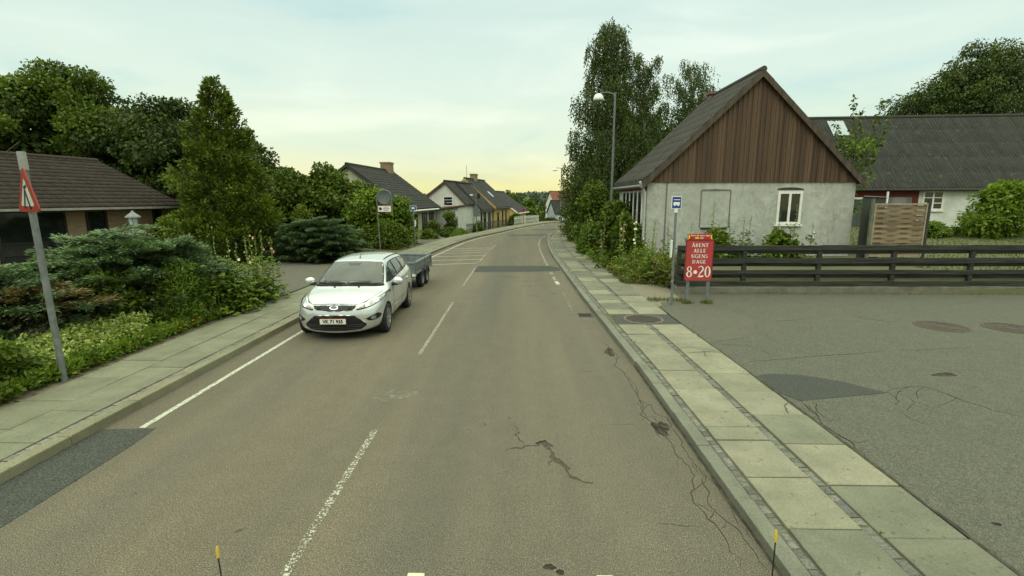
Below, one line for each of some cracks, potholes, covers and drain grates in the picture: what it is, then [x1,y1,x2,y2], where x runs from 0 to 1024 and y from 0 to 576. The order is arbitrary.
crack [507,428,592,484]
pothole [650,422,669,437]
manhole cover [623,314,664,324]
manhole cover [980,322,1024,334]
crack [887,386,1017,429]
crack [784,402,869,457]
crack [602,342,770,572]
manhole cover [912,321,972,333]
